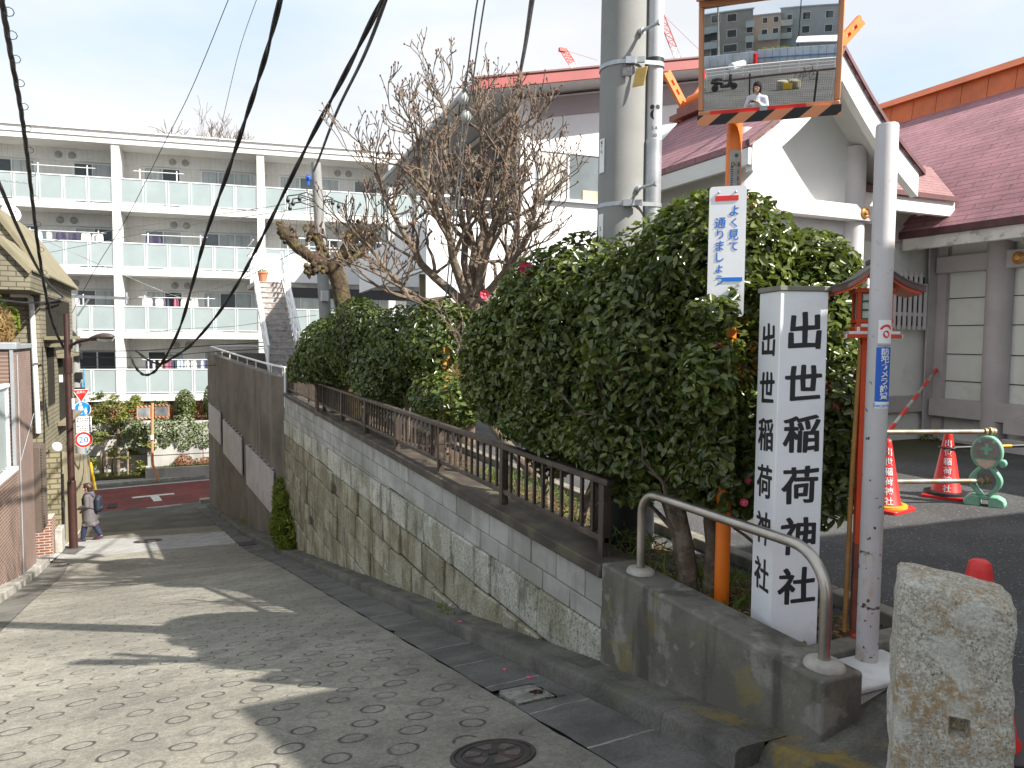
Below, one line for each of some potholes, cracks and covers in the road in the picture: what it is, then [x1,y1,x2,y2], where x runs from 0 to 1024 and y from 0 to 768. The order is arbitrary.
manhole cover [450,738,536,768]
